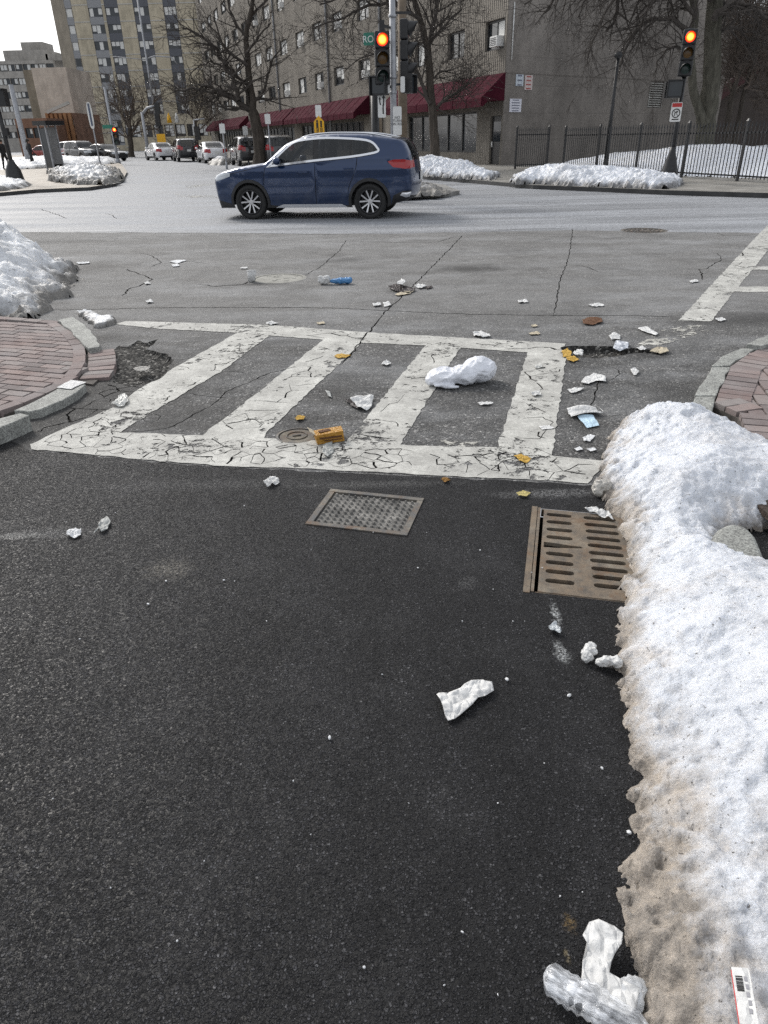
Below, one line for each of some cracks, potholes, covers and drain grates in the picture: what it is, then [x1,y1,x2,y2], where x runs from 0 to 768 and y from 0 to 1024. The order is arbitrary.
crack [77,228,672,317]
crack [675,232,763,305]
drain grate [523,506,634,603]
pothole [560,346,652,358]
crack [36,369,410,469]
manhole cover [276,428,315,443]
manhole cover [255,273,306,283]
pothole [112,339,173,386]
